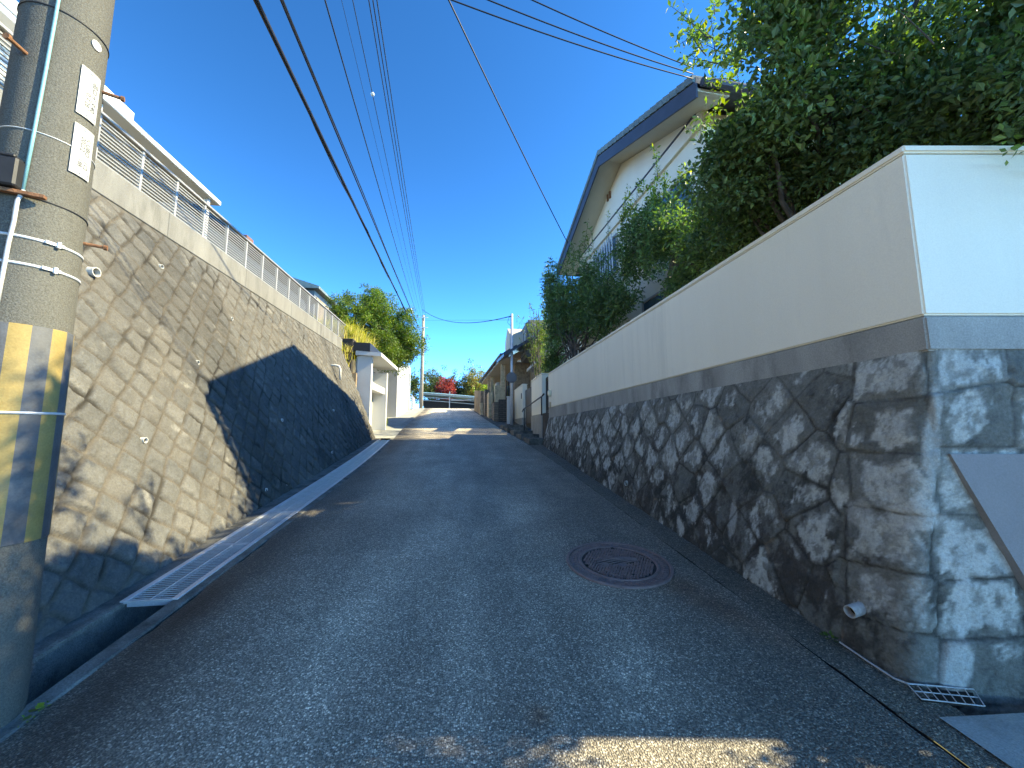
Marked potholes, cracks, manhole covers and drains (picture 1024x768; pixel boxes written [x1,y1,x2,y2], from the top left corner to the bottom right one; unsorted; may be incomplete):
drain grate [120,543,254,607]
drain grate [325,465,360,476]
drain grate [213,511,298,545]
drain grate [267,490,327,512]
manhole cover [566,542,674,589]
drain grate [301,475,347,491]
drain grate [343,456,371,465]
